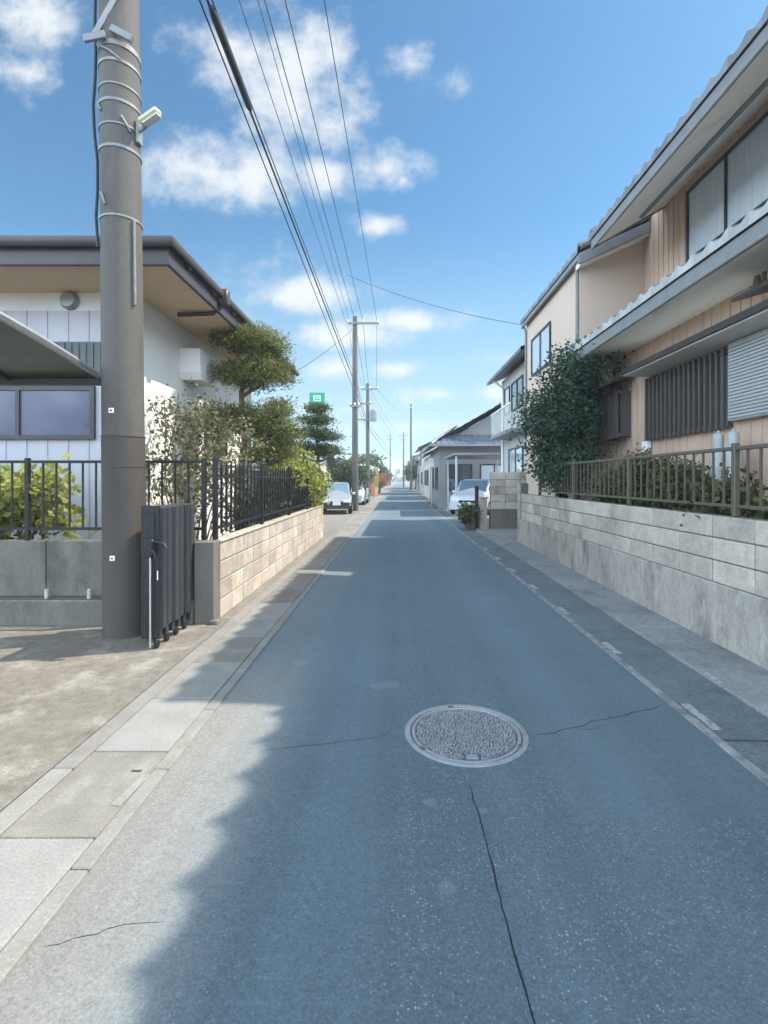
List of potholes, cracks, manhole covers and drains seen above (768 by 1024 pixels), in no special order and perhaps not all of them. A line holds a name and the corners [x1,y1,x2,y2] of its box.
crack [533,705,660,736]
crack [41,921,166,947]
crack [262,735,398,751]
manhole cover [405,704,529,768]
crack [469,782,536,1024]
